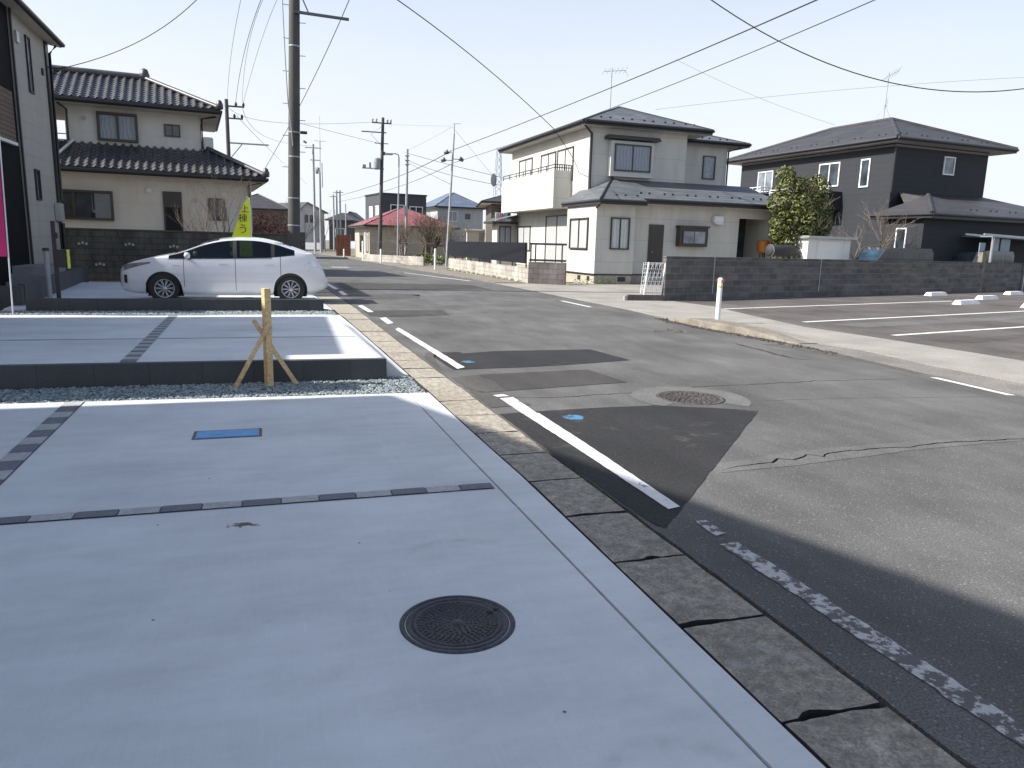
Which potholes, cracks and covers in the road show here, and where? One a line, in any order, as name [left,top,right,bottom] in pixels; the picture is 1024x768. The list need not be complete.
crack [728,439,1007,469]
manhole cover [631,386,751,407]
crack [736,343,809,360]
manhole cover [399,595,515,654]
